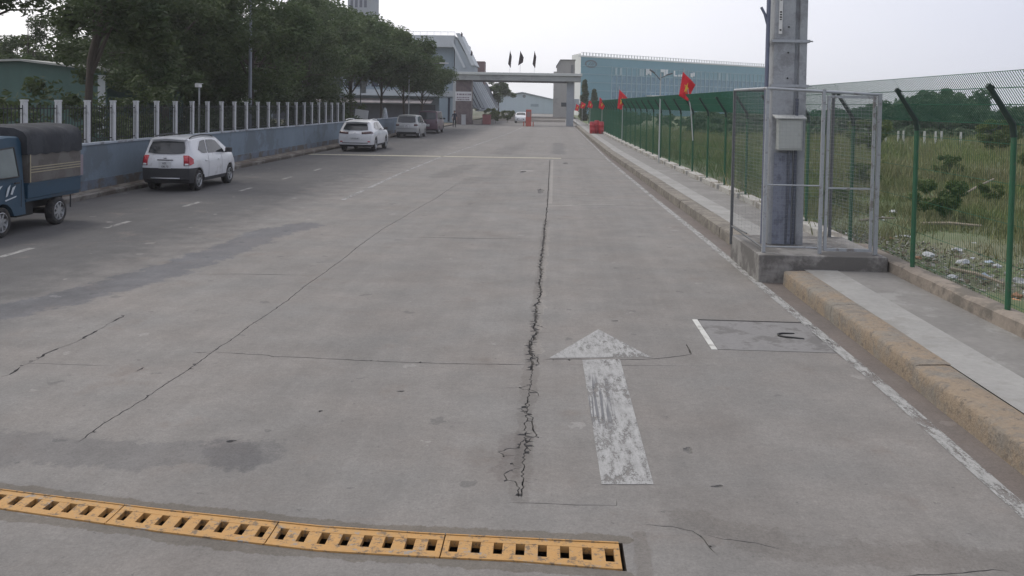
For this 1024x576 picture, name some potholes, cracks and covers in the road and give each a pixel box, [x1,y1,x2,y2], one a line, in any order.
crack [79,162,692,497]
manhole cover [692,319,837,353]
crack [646,524,783,553]
drain grate [0,488,627,571]
crack [1,314,127,377]
